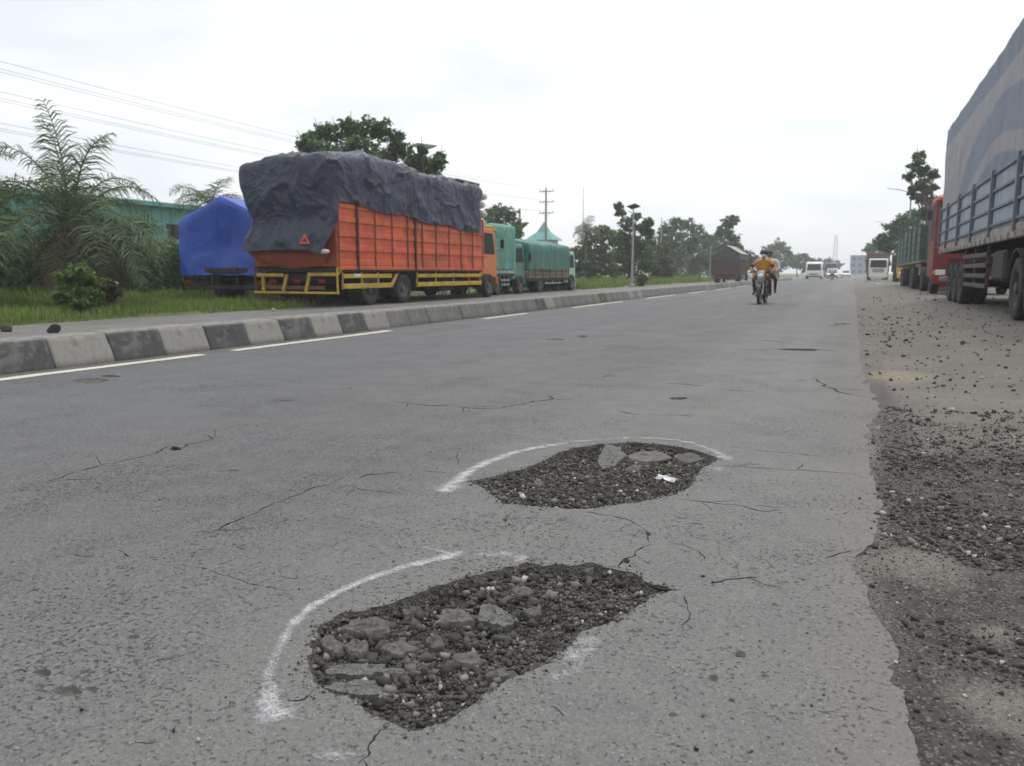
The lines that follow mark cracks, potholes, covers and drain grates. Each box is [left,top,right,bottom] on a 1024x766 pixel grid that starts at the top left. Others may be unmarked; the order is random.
crack [358,725,389,766]
crack [389,392,568,413]
crack [799,377,863,396]
crack [648,585,714,627]
crack [31,430,217,486]
crack [204,472,398,535]
pothole [471,442,719,509]
crack [674,543,777,587]
crack [583,505,651,566]
pothole [307,562,677,731]
